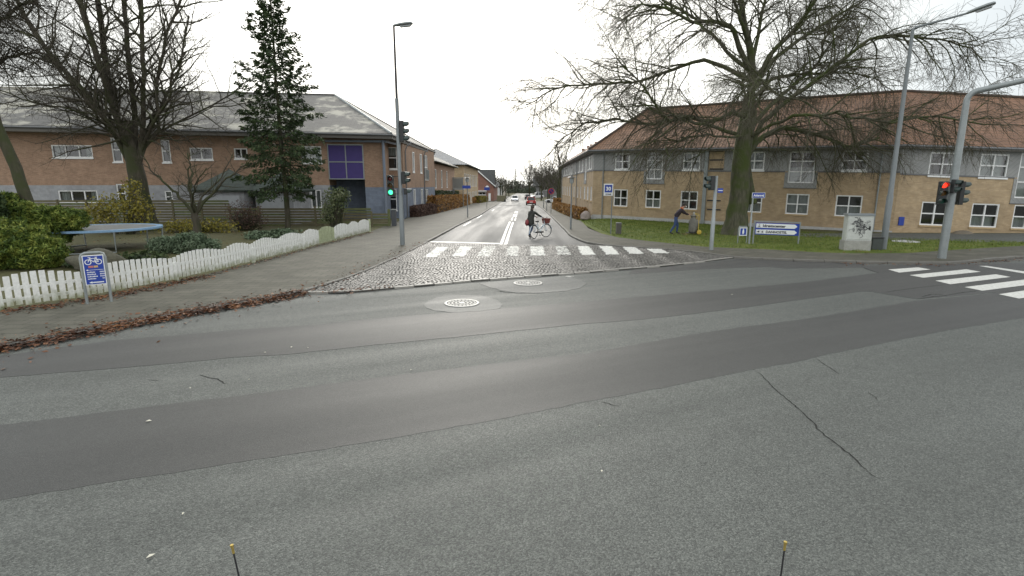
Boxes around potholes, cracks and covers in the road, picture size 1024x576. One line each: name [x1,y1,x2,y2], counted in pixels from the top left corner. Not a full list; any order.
manhole cover [444,299,479,307]
crack [756,371,880,479]
